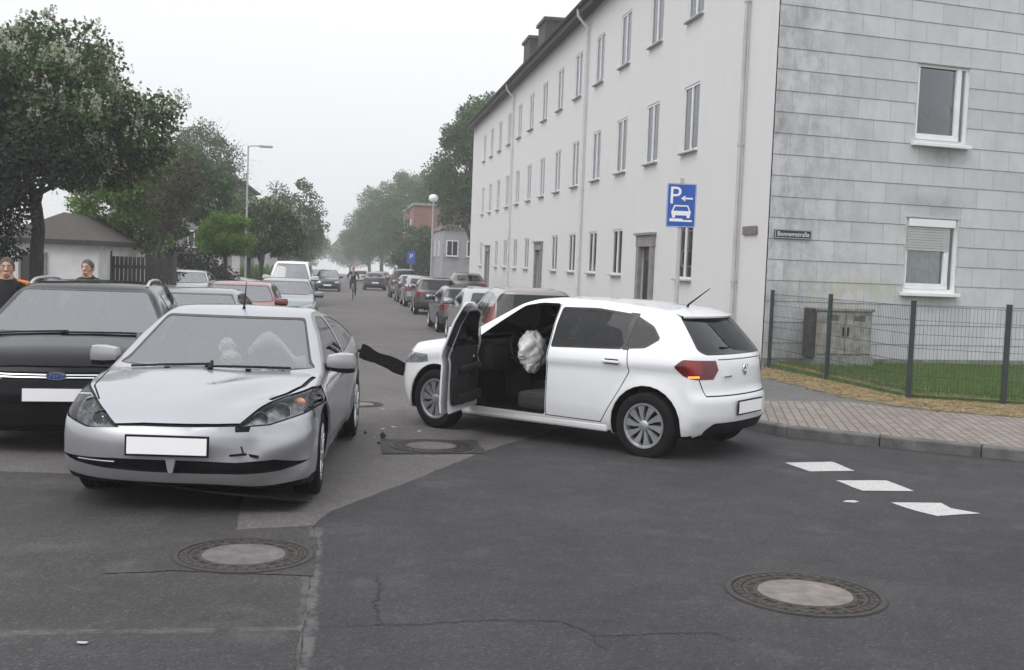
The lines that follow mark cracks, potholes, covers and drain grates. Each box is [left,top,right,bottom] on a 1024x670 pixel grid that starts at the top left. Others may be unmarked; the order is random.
crack [318,570,743,651]
manhole cover [389,439,474,454]
manhole cover [724,571,889,618]
manhole cover [171,537,315,574]
